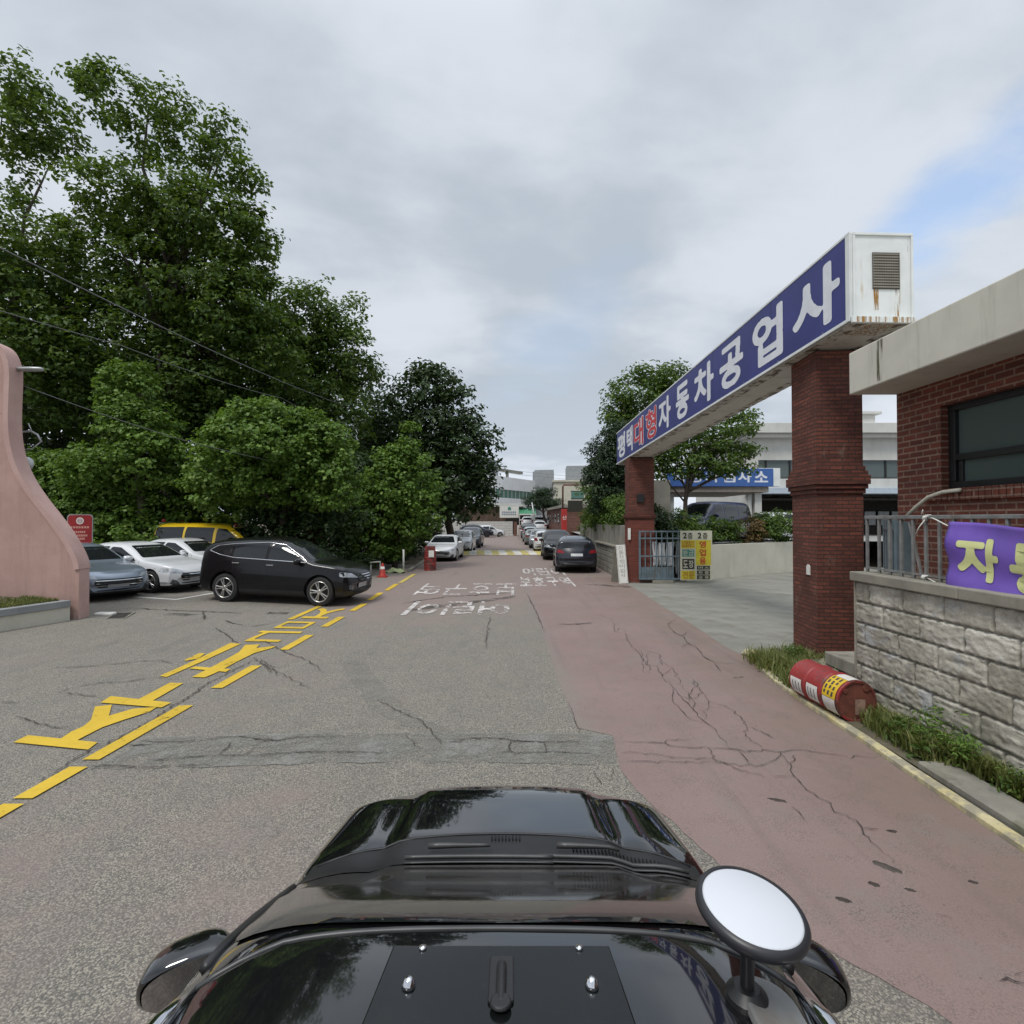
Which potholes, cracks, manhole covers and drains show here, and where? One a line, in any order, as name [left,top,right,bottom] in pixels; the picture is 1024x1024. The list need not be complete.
crack [376,698,580,753]
pothole [872,860,902,874]
crack [594,703,892,858]
crack [601,615,727,743]
